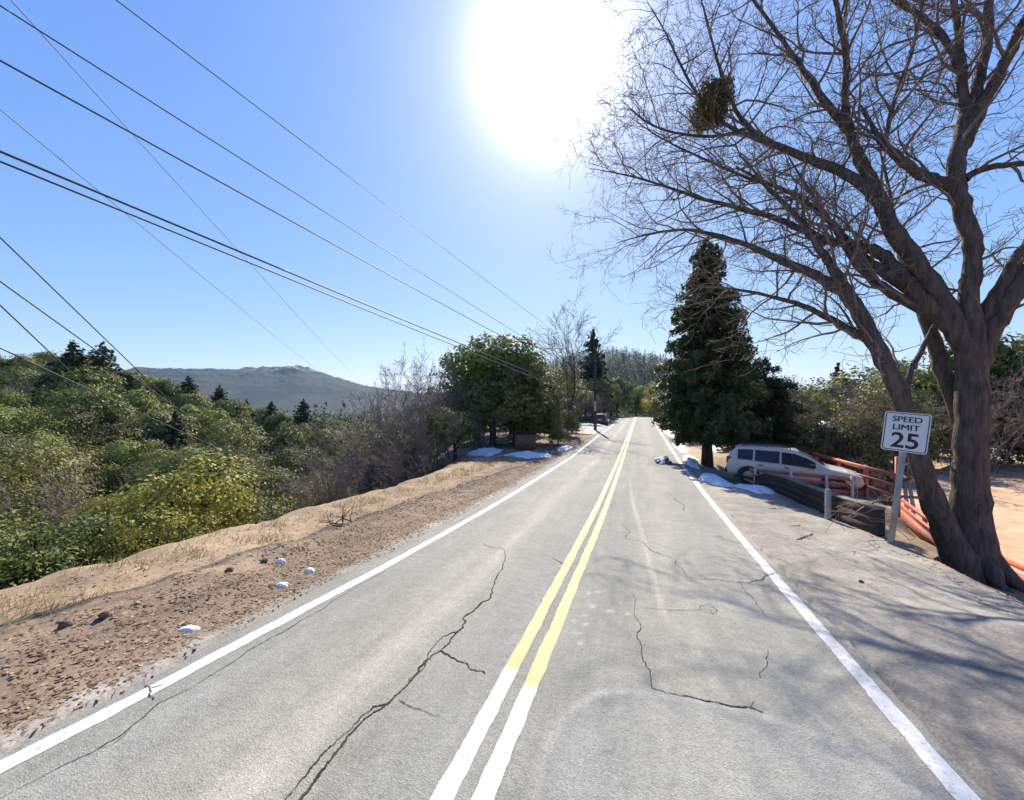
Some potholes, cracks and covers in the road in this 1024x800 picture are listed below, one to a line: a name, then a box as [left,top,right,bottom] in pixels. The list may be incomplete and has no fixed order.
crack [633,596,763,712]
crack [285,543,506,800]
crack [625,527,774,616]
